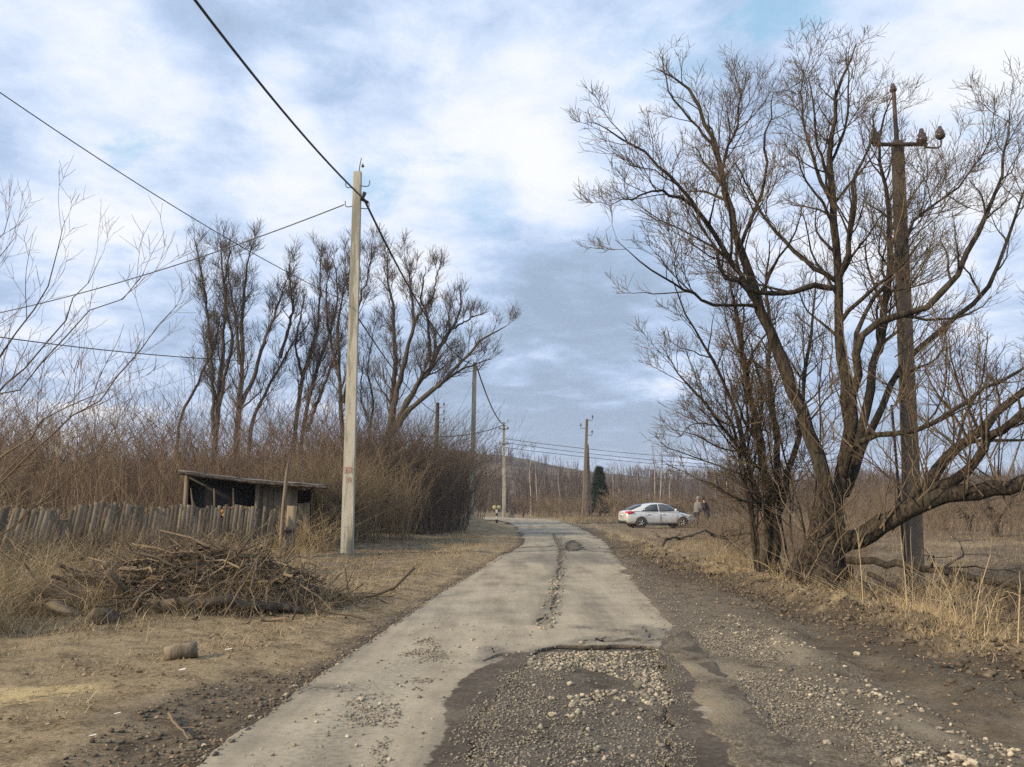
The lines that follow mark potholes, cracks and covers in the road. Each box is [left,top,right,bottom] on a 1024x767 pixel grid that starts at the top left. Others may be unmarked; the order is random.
pothole [463,644,678,767]
pothole [559,540,585,551]
